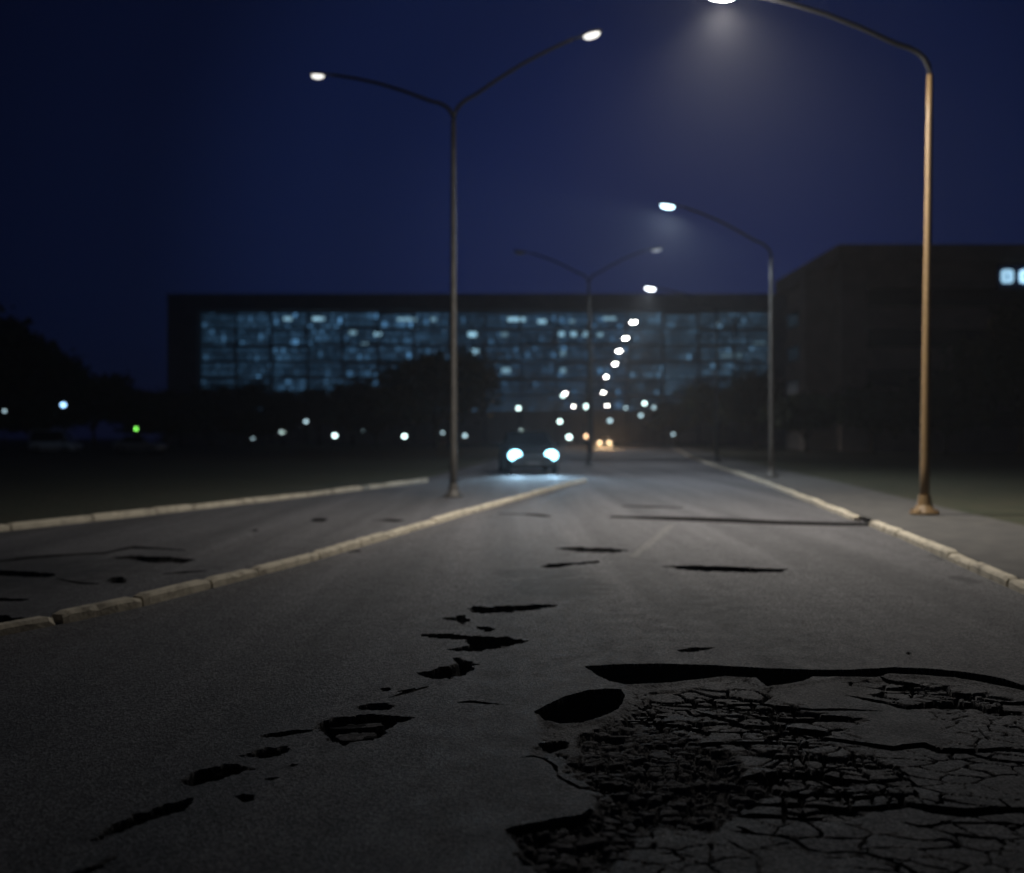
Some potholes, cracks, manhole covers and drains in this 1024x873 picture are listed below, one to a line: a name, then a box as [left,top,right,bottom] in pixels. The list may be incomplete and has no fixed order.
pothole [467,604,558,614]
pothole [661,565,788,573]
pothole [534,688,625,724]
pothole [421,634,528,652]
pothole [178,763,255,786]
pothole [584,663,1024,690]
crack [0,546,206,584]
crack [457,674,1024,873]
pothole [87,798,193,842]
pothole [417,657,480,679]
pothole [316,714,415,746]
